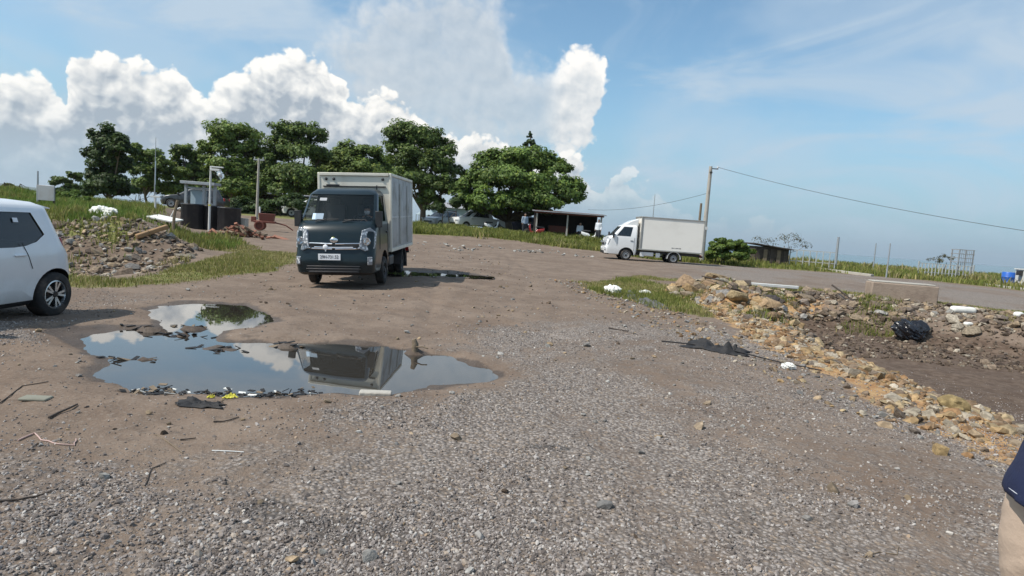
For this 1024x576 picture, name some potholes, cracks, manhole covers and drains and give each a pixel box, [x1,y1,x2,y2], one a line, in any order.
pothole [44,301,507,398]
